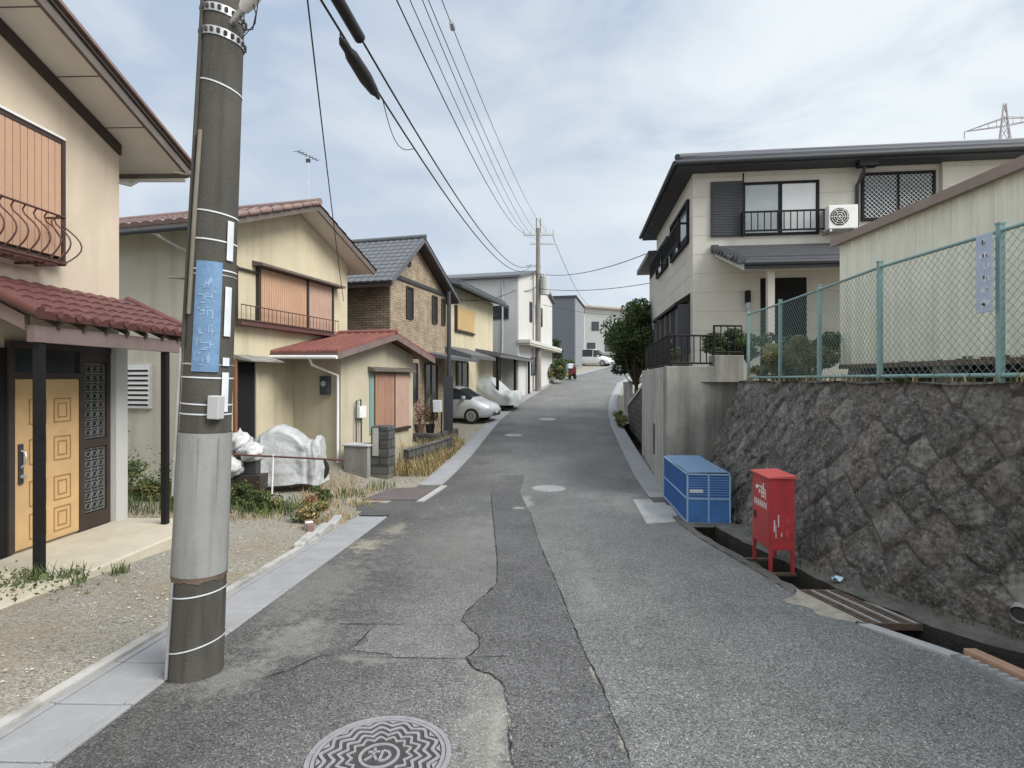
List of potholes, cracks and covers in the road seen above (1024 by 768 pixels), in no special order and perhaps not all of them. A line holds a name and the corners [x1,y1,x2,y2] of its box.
drain grate [794,589,923,631]
crack [258,495,514,766]
manhole cover [303,716,451,768]
